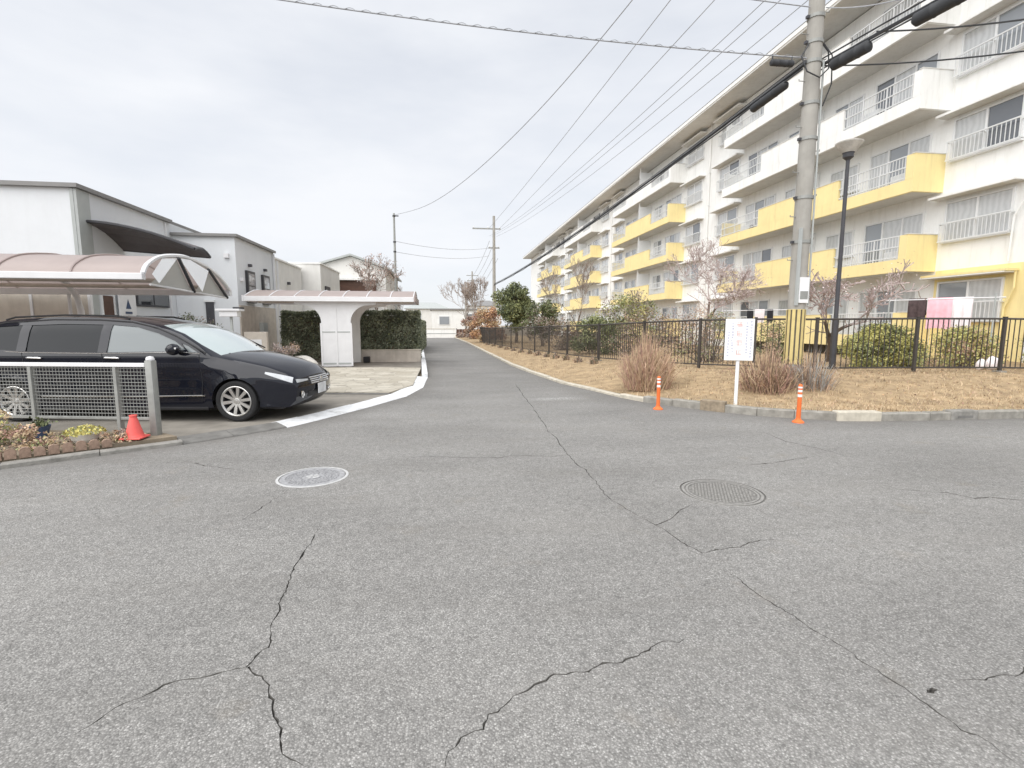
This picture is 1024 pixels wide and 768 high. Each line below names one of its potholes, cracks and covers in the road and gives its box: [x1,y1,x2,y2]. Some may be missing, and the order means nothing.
manhole cover [678,479,768,507]
crack [899,489,1016,500]
crack [48,520,321,767]
crack [445,637,687,766]
manhole cover [275,467,349,488]
crack [726,571,1024,766]
crack [421,389,778,553]
